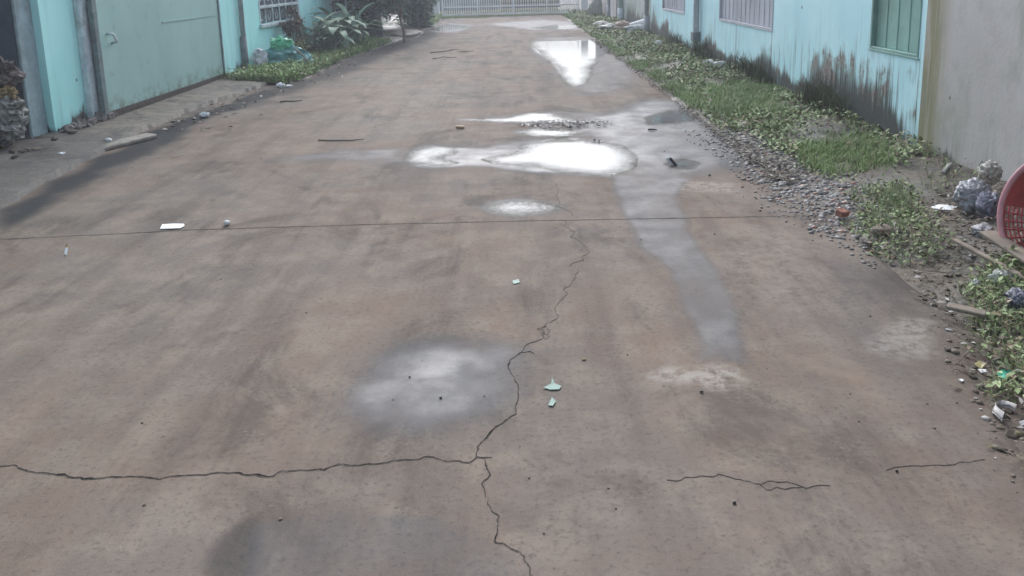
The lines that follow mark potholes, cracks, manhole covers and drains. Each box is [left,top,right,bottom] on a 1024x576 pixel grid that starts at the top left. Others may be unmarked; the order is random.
crack [671,474,829,490]
crack [0,183,589,576]
crack [887,459,985,470]
